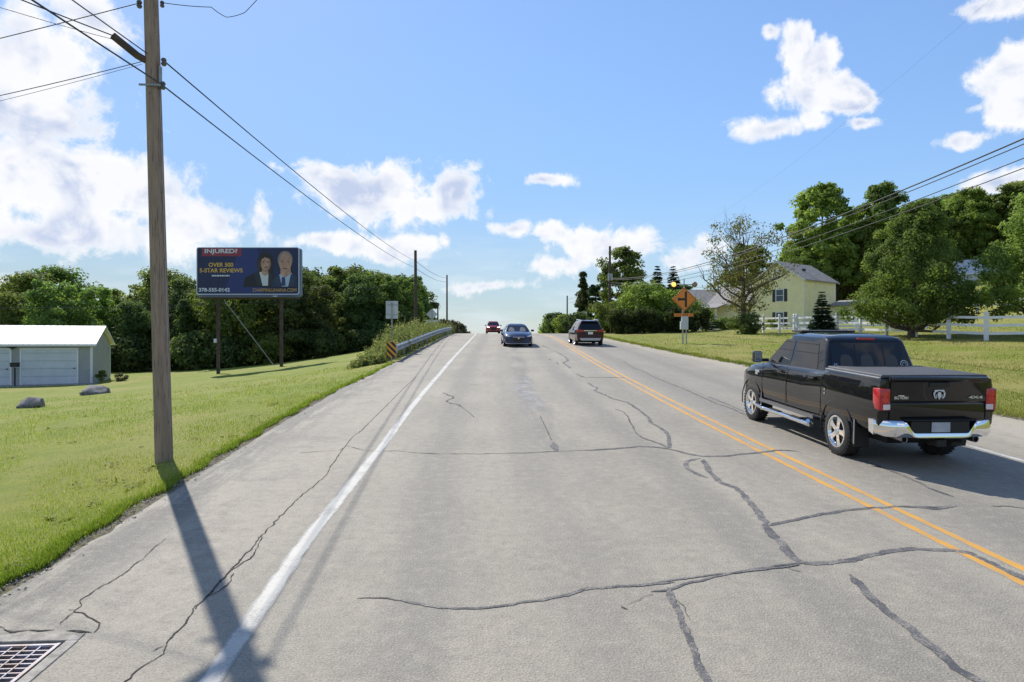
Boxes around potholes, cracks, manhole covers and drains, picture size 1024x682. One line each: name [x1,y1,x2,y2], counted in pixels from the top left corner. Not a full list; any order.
crack [346,374,793,457]
drain grate [0,633,85,682]
crack [0,385,407,682]
